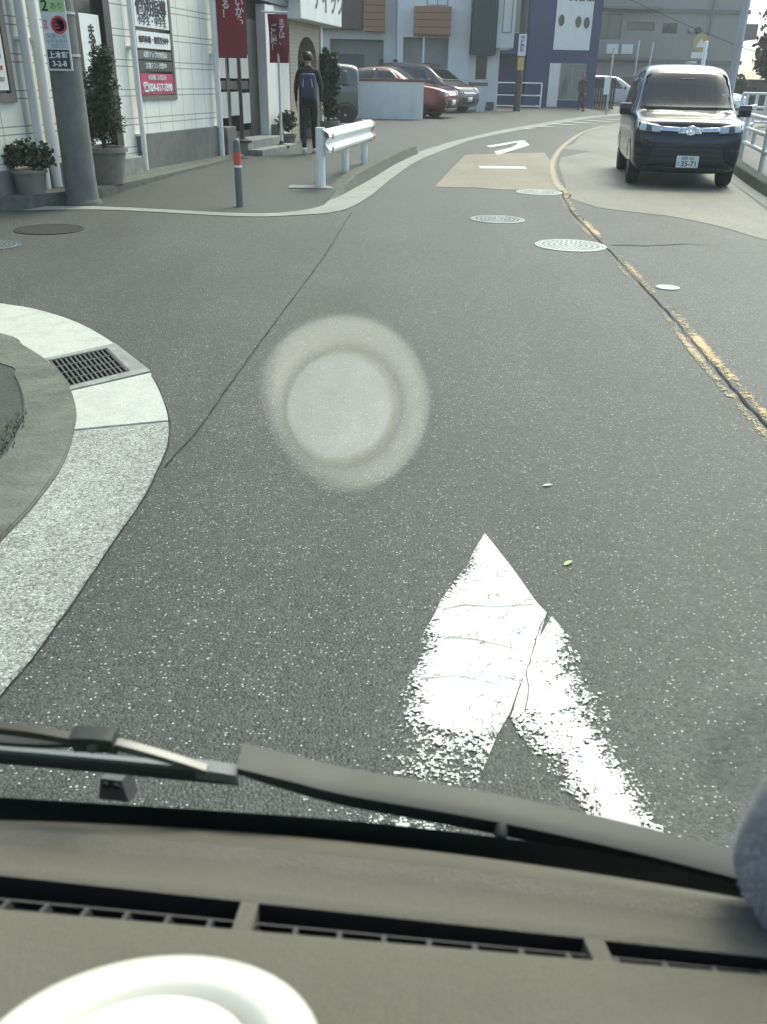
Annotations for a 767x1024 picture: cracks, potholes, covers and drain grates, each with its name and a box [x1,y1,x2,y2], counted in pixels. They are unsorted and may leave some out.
manhole cover [13,224,85,235]
manhole cover [470,215,525,224]
crack [420,604,548,712]
crack [562,193,767,426]
drain grate [44,343,151,391]
manhole cover [535,239,607,252]
manhole cover [0,240,22,250]
